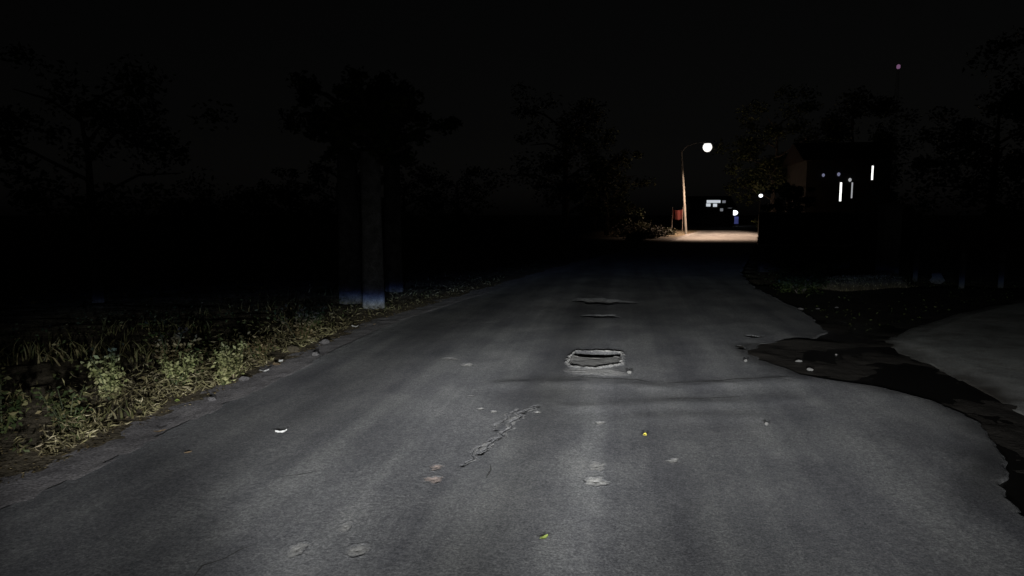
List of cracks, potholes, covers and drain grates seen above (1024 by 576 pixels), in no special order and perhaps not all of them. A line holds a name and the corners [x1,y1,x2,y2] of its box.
crack [465,406,537,478]
pothole [570,297,639,305]
